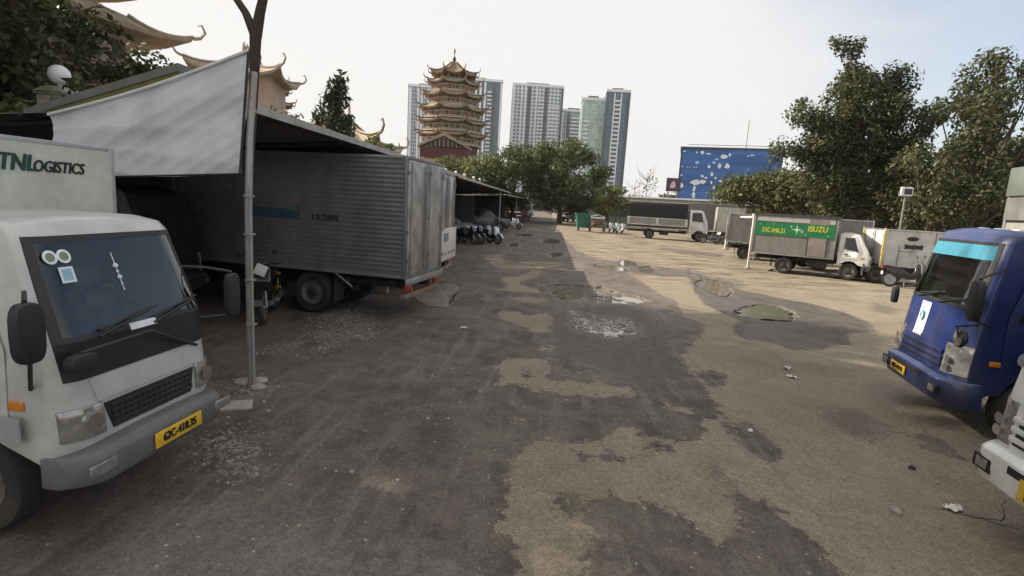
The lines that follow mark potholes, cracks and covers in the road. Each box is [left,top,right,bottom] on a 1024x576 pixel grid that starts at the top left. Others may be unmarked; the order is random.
pothole [547,283,653,304]
pothole [570,311,641,339]
pothole [688,269,740,297]
pothole [637,265,658,273]
pothole [733,304,800,322]
crack [937,500,1021,529]
